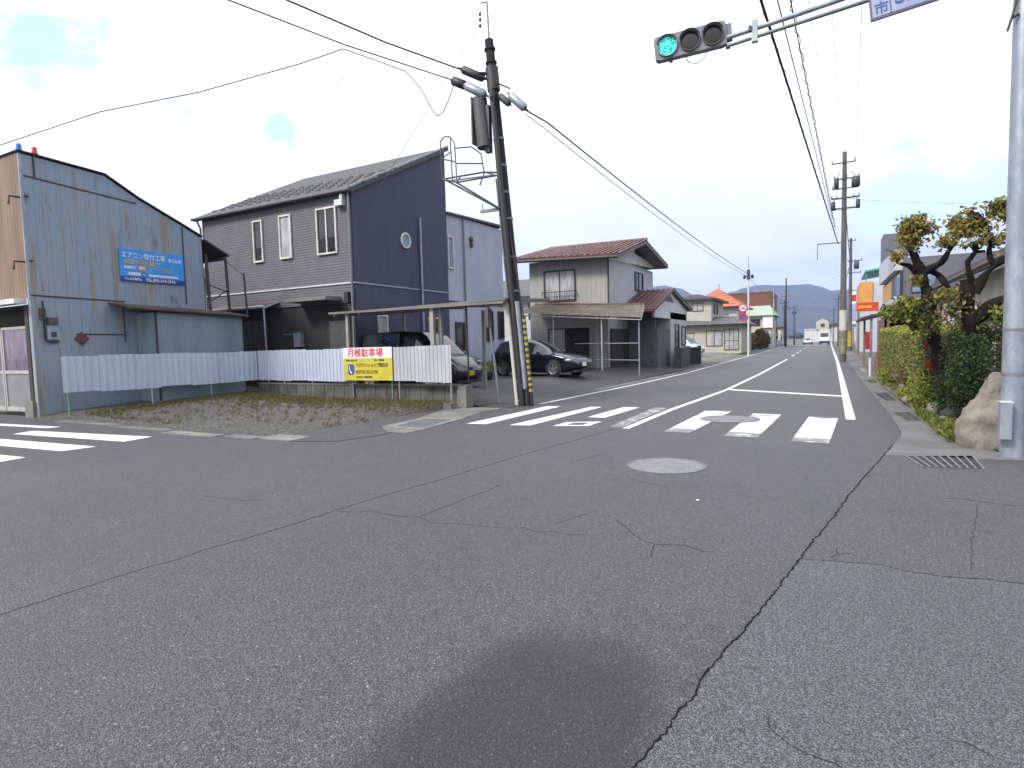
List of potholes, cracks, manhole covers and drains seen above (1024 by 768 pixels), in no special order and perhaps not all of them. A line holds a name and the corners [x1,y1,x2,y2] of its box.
crack [341,488,587,535]
crack [616,445,892,768]
drain grate [906,455,985,469]
drain grate [893,412,921,421]
manhole cover [627,458,707,474]
crack [945,498,1018,570]
